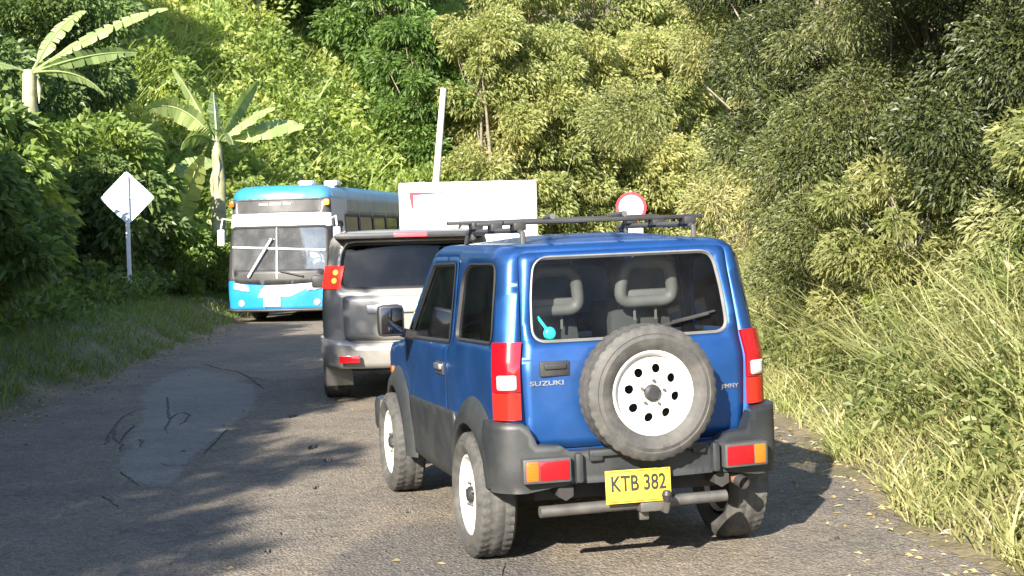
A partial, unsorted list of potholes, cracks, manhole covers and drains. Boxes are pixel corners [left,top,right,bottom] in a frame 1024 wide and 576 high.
crack [202,363,264,389]
crack [102,472,140,508]
crack [164,397,228,455]
crack [104,409,144,453]
